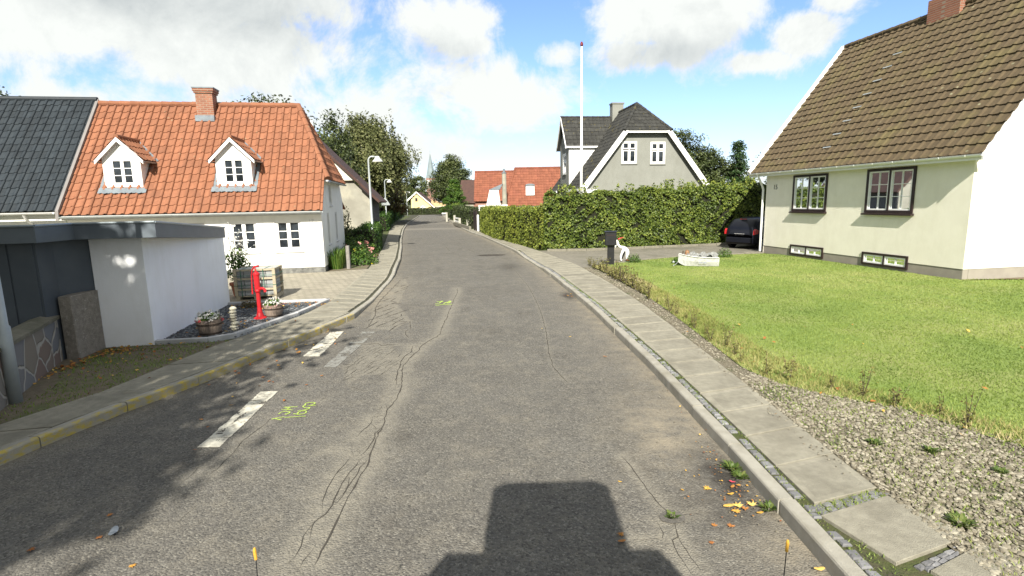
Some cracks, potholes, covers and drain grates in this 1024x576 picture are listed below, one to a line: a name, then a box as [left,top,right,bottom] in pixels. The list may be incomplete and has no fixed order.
crack [627,462,702,573]
crack [295,278,458,564]
